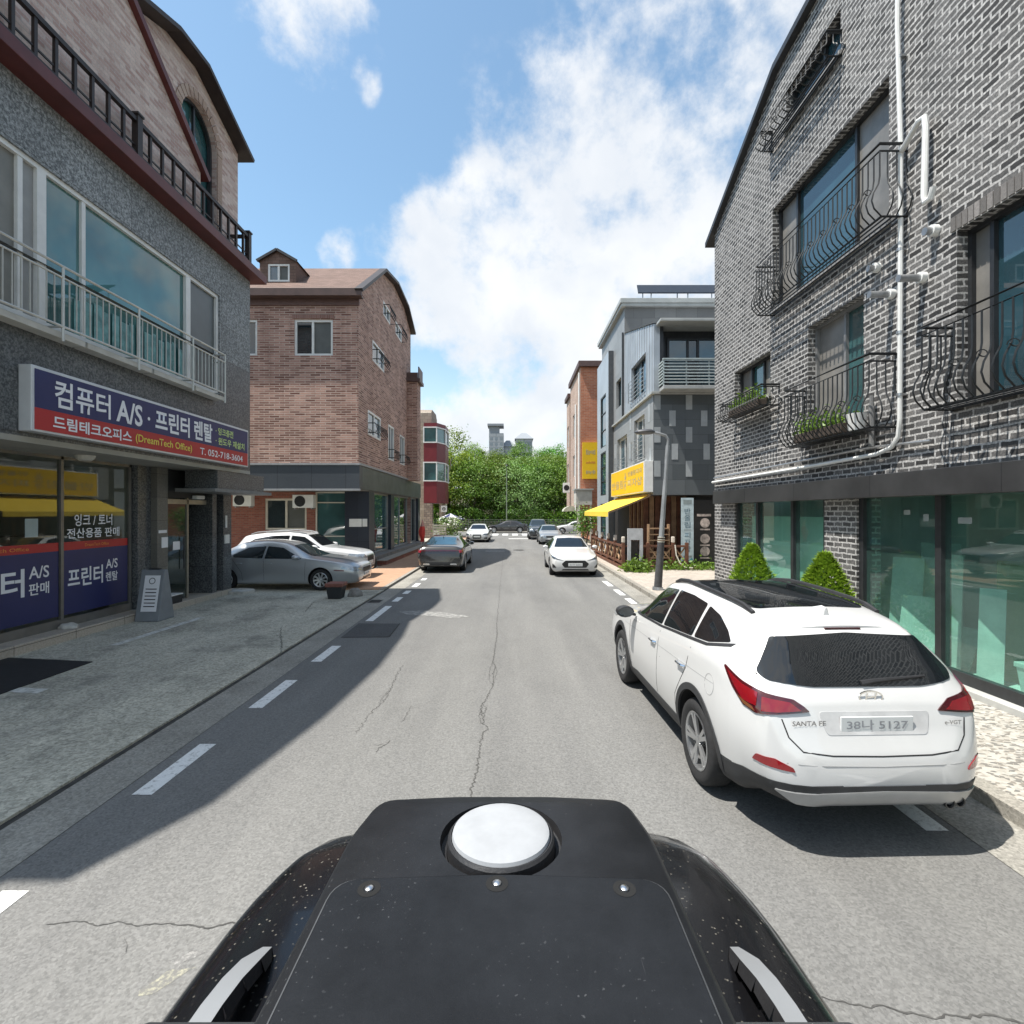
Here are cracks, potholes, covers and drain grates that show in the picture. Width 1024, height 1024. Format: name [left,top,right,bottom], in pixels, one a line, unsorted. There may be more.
crack [49,921,236,954]
crack [821,996,1024,1024]
crack [469,558,503,797]
